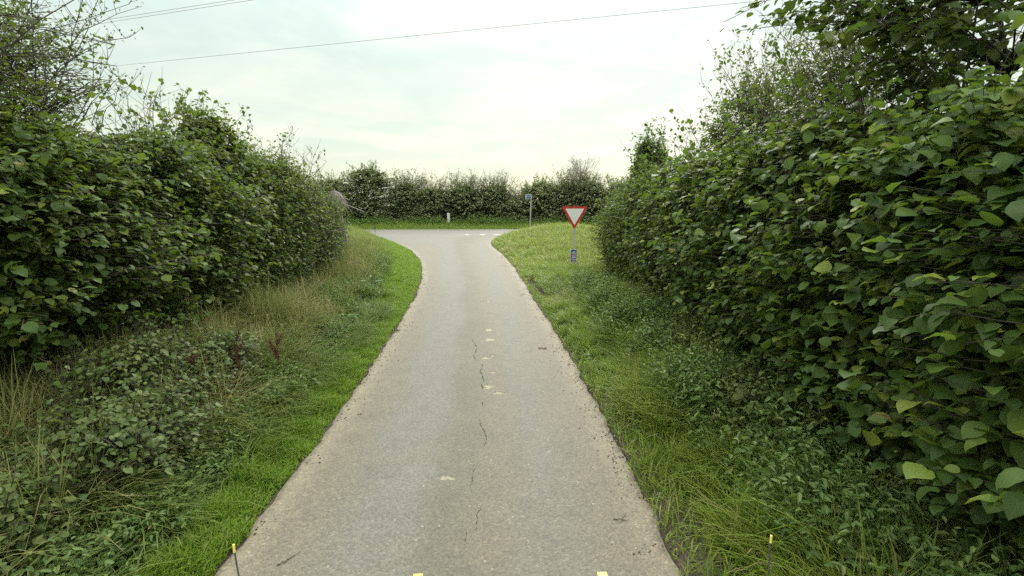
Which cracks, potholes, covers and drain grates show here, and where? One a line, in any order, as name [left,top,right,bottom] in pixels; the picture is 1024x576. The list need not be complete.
crack [472,340,487,446]
